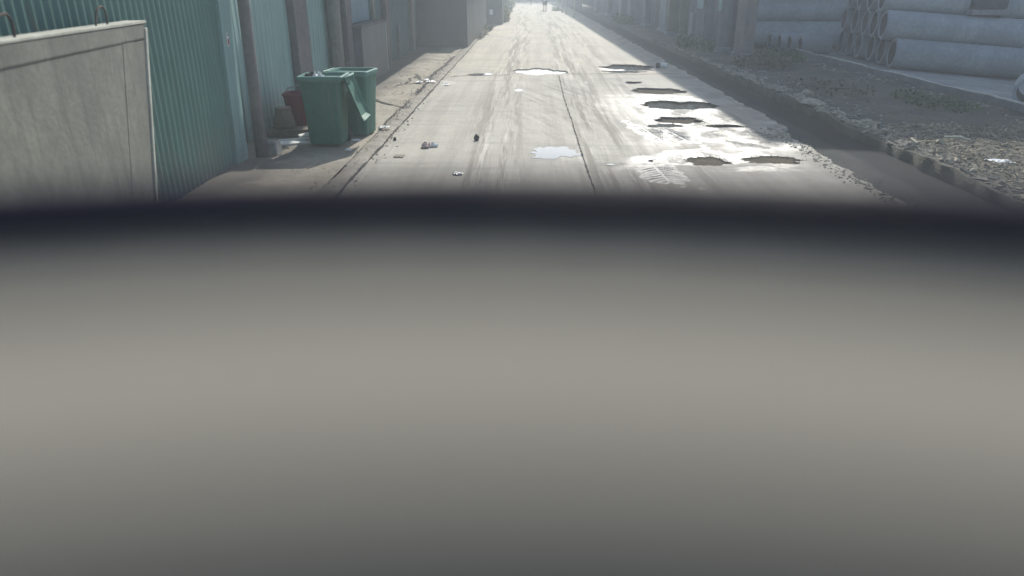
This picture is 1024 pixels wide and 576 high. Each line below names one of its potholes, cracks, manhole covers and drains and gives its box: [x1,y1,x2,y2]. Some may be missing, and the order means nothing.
pothole [638,100,719,110]
pothole [684,155,732,166]
pothole [740,155,807,164]
pothole [653,116,704,124]
